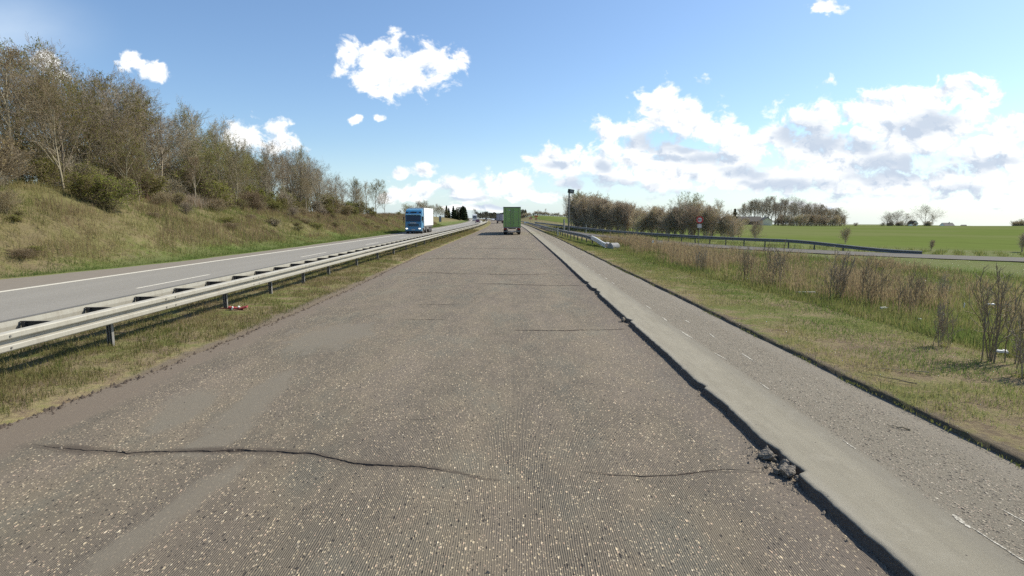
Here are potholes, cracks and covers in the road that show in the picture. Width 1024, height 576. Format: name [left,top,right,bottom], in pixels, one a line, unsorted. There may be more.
crack [40,445,496,480]
crack [592,469,768,477]
